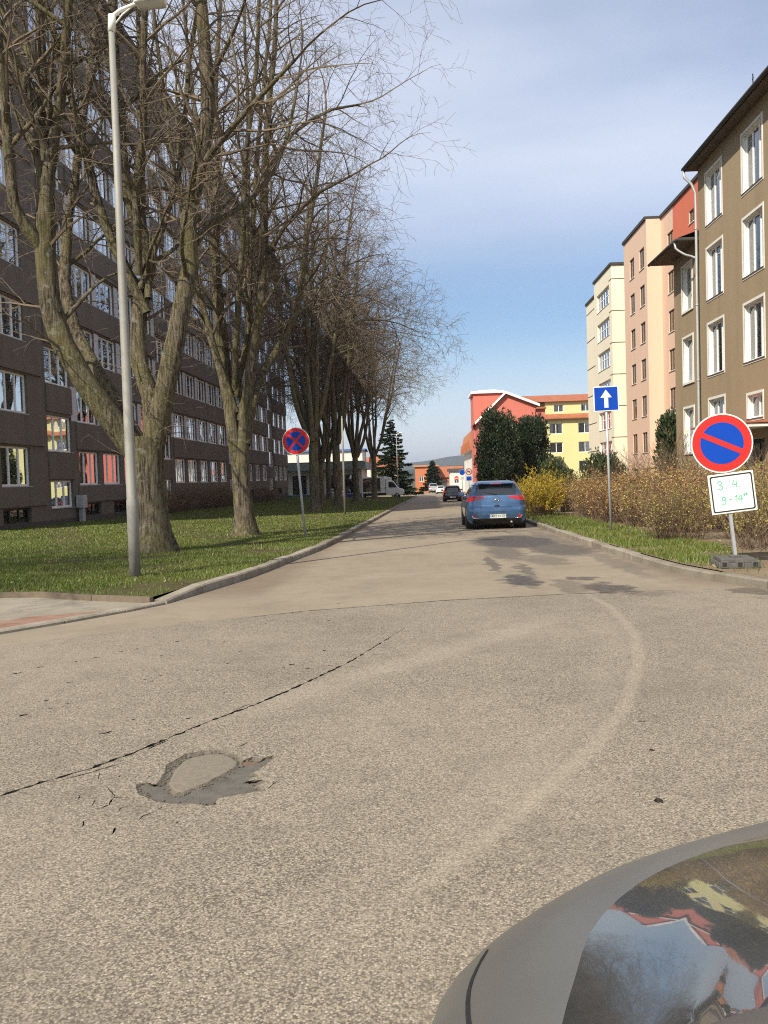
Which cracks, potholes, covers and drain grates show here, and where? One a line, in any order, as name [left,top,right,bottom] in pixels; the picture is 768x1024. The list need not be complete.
crack [1,630,401,843]
pothole [136,750,274,806]
